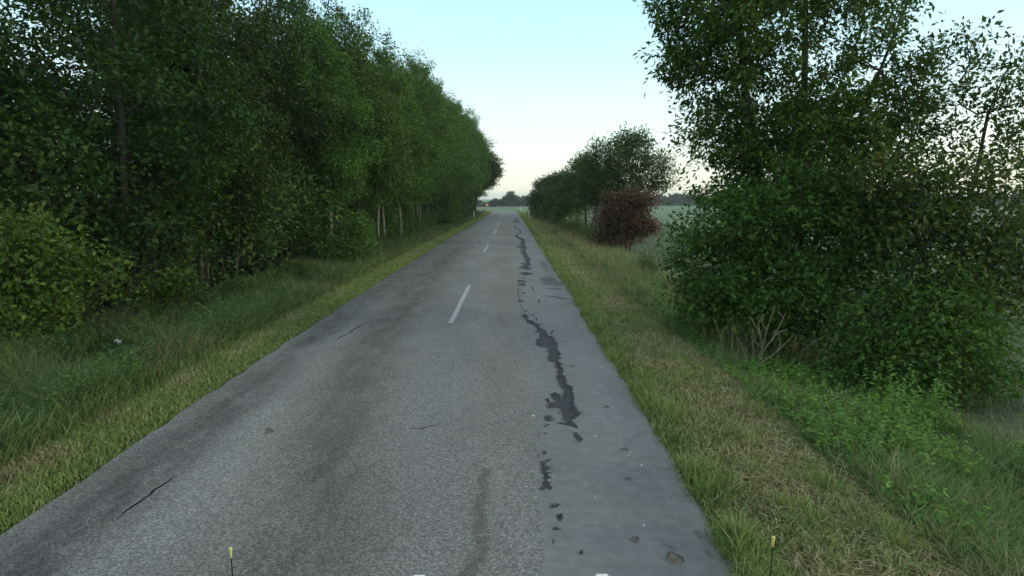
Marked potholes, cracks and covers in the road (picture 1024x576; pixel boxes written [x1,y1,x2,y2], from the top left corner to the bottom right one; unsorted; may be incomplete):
crack [115,475,178,521]
pothole [665,551,684,565]
